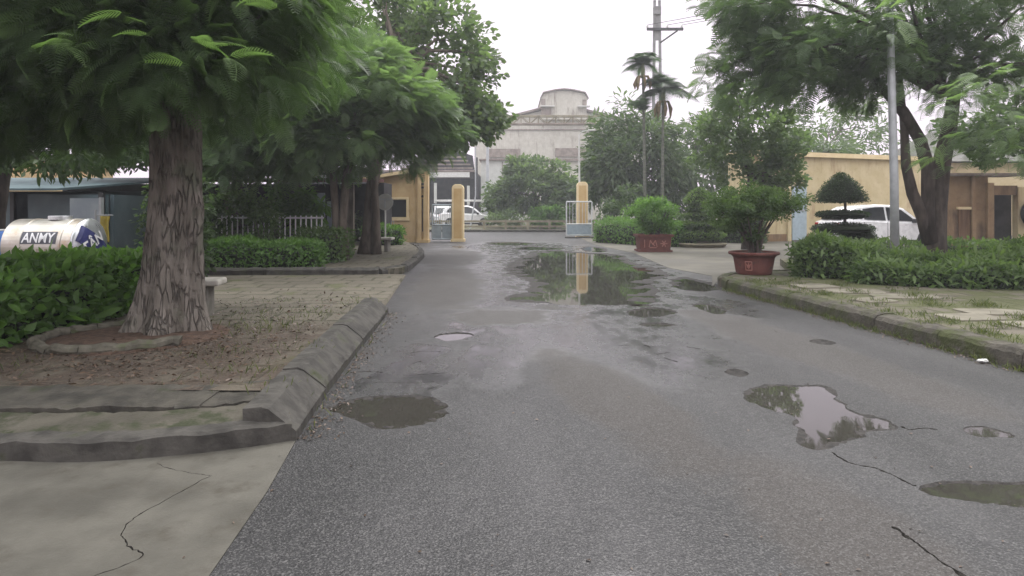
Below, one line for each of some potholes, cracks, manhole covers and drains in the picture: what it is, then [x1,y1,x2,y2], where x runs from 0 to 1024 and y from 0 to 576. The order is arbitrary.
pothole [963,426,1015,438]
crack [94,464,210,576]
pothole [325,395,450,429]
pothole [724,369,749,377]
crack [832,452,916,486]
pothole [742,384,898,450]
pothole [919,480,1024,508]
pothole [434,332,474,341]
crack [892,526,966,576]
